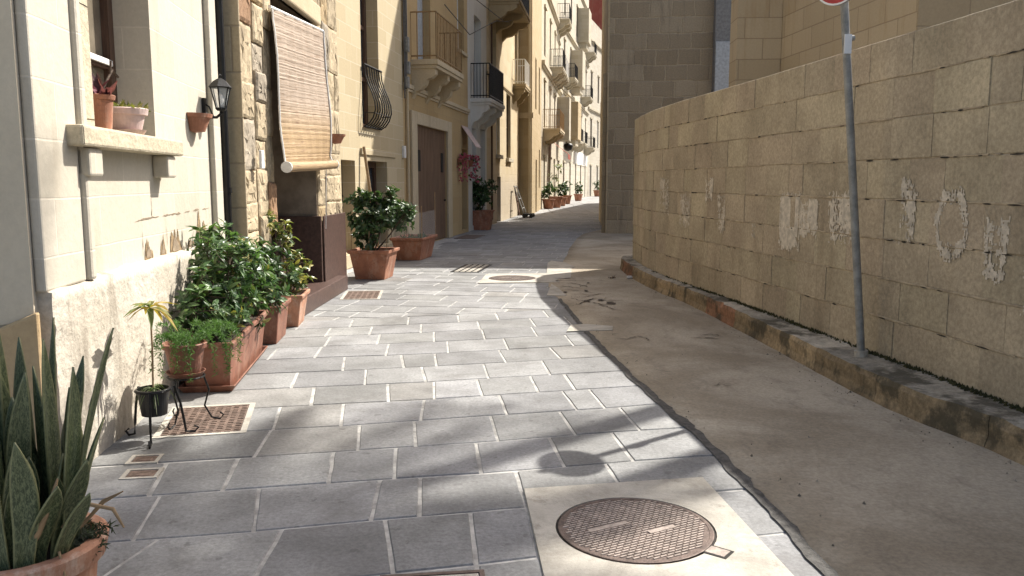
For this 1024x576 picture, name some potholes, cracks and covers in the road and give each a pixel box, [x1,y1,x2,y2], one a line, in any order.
drain grate [450,264,492,273]
manhole cover [478,273,559,284]
manhole cover [524,477,794,576]
